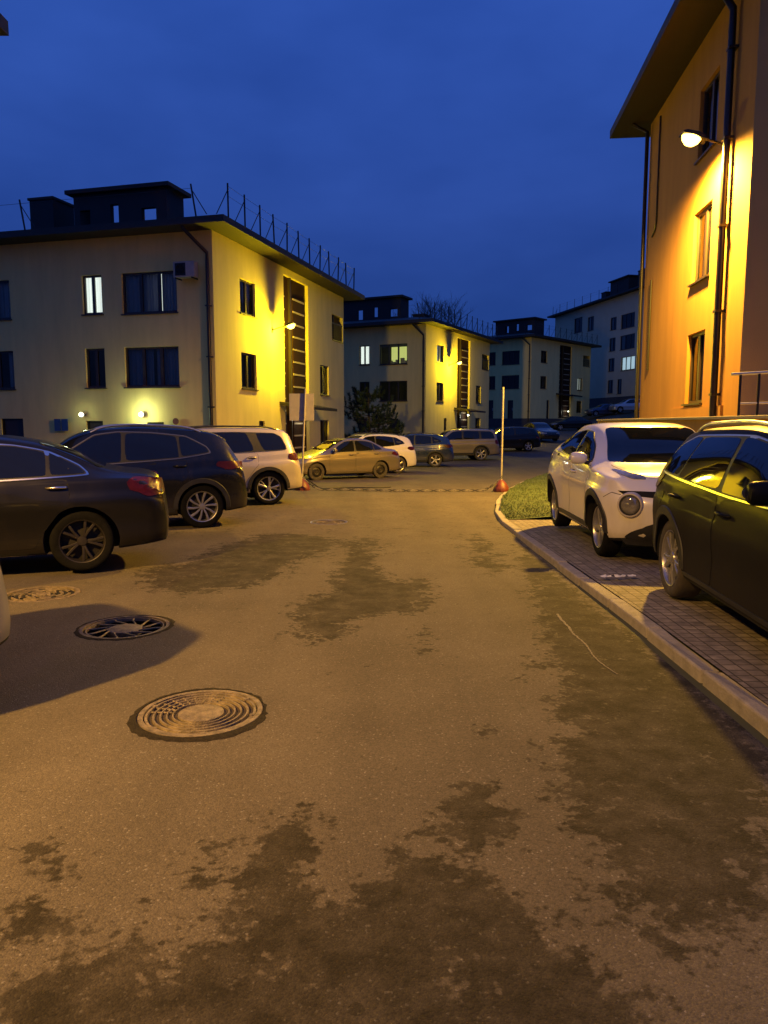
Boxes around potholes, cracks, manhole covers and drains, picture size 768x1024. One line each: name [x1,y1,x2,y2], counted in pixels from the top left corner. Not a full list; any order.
manhole cover [126,688,268,742]
manhole cover [73,615,175,641]
manhole cover [7,586,81,602]
